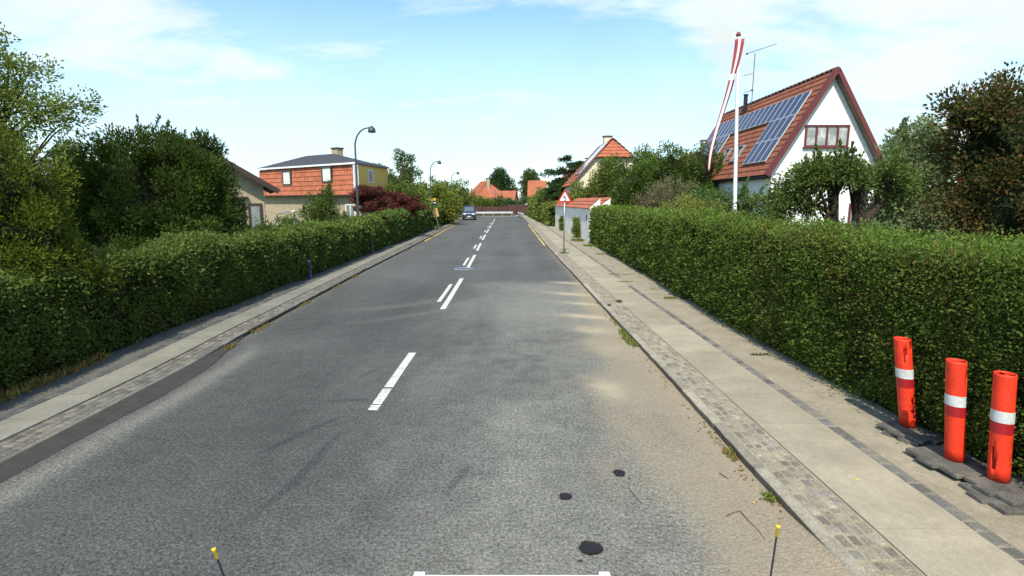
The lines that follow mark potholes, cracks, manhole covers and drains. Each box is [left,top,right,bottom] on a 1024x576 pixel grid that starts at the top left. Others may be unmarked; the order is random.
pothole [579,541,604,555]
